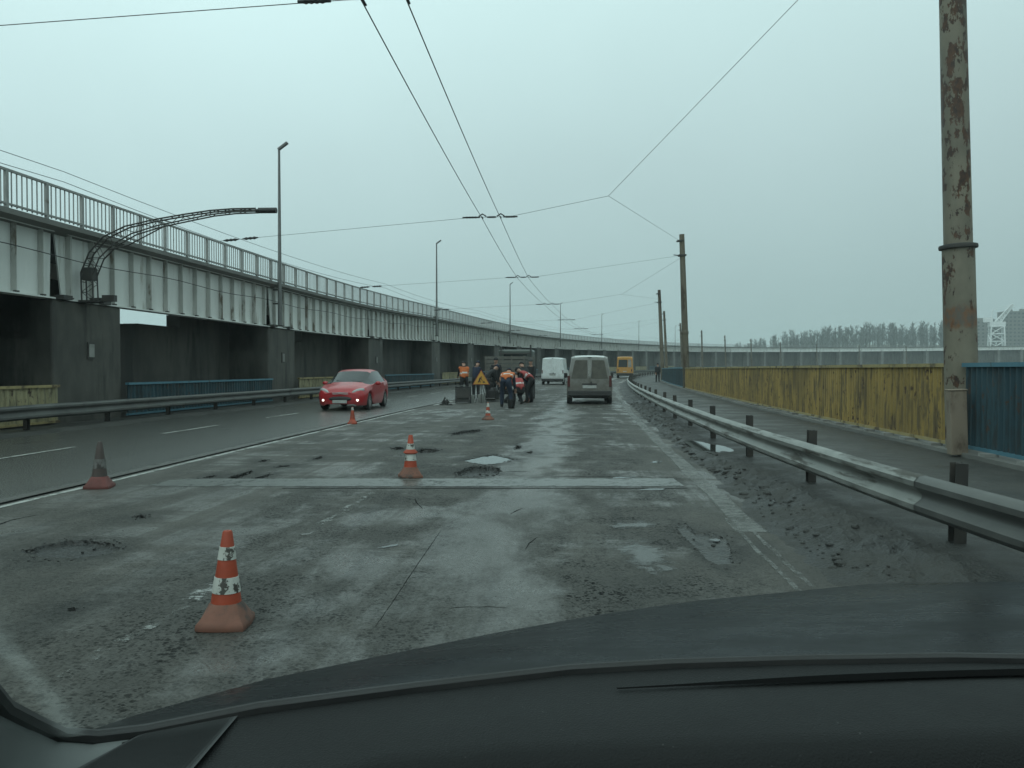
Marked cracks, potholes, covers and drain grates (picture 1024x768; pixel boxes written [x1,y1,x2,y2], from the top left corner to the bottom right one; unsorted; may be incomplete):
pothole [453,465,508,478]
pothole [13,538,127,562]
pothole [674,522,743,569]
crack [376,532,440,625]
